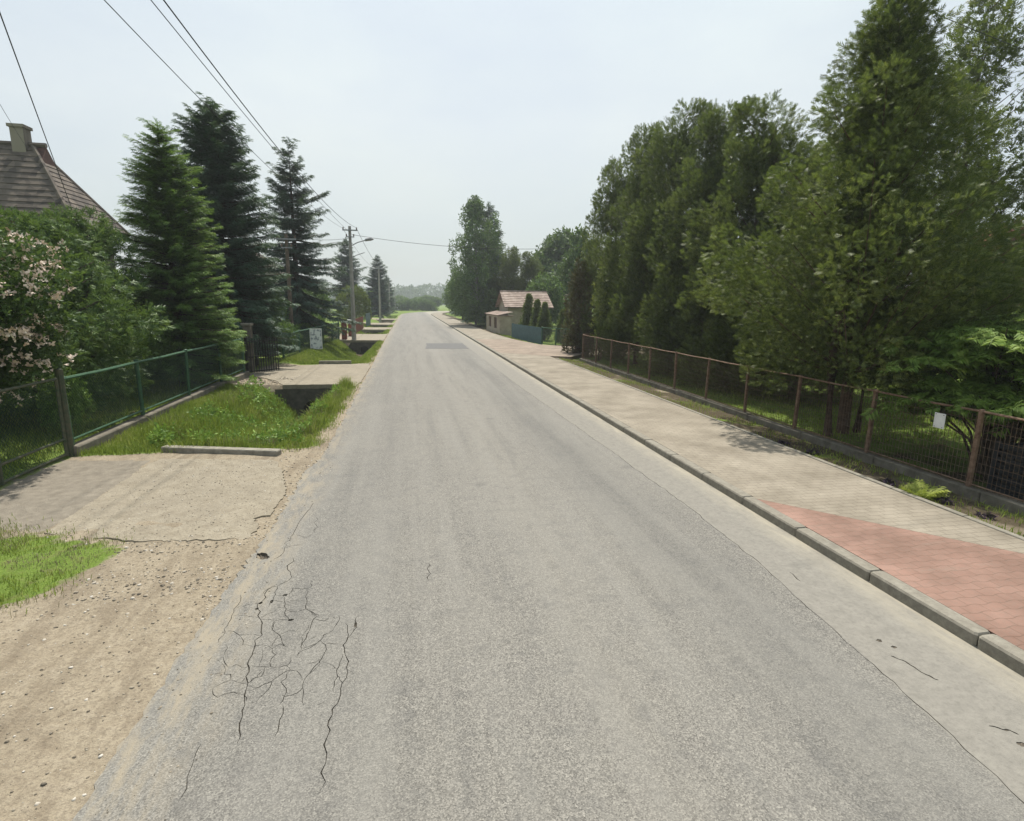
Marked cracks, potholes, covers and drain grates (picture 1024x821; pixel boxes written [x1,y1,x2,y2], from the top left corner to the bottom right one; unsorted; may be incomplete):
crack [182,559,358,796]
